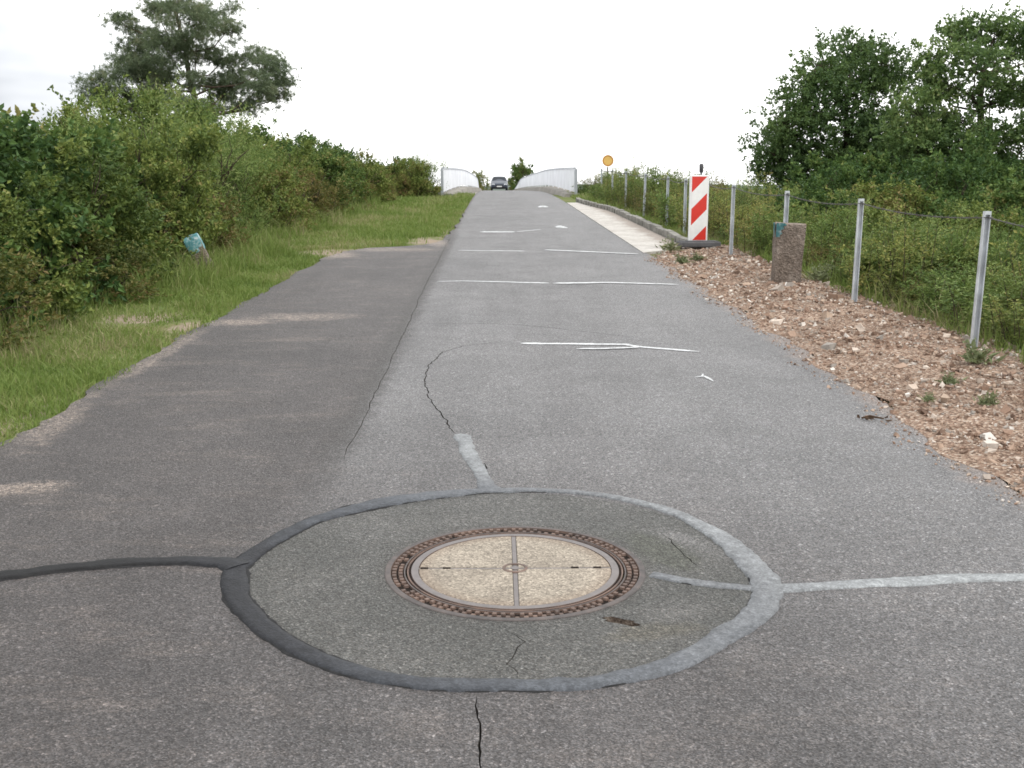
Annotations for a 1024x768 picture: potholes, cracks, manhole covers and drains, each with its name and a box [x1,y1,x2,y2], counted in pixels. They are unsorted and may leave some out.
manhole cover [384,526,646,621]
crack [424,342,495,432]
